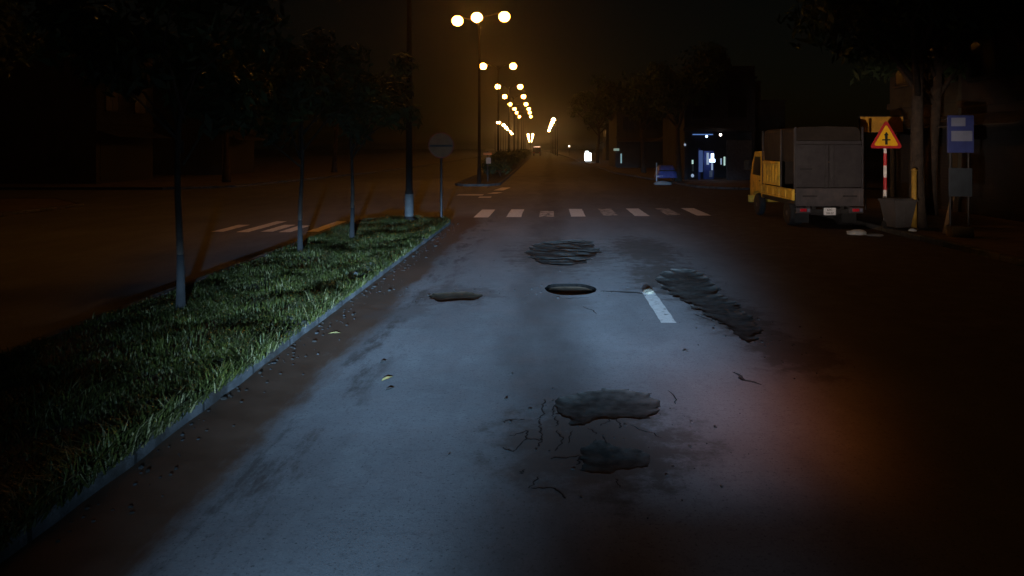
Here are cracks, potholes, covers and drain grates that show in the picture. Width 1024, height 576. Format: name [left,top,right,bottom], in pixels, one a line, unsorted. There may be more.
crack [503,400,661,499]
pothole [554,388,661,426]
pothole [429,292,483,302]
crack [733,372,762,385]
pothole [525,240,602,266]
pothole [655,269,764,344]
pothole [578,439,651,474]
pothole [545,284,597,295]
